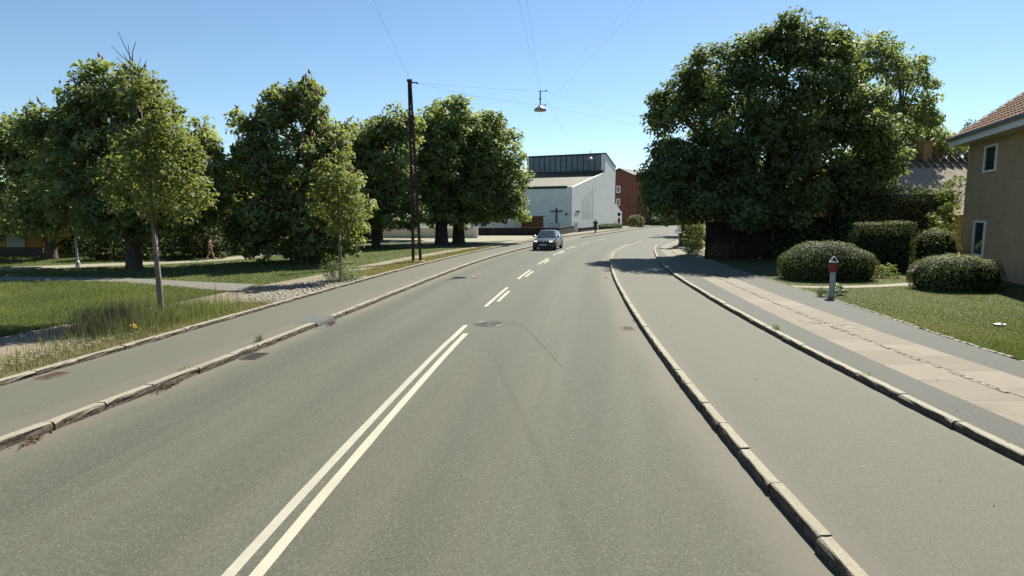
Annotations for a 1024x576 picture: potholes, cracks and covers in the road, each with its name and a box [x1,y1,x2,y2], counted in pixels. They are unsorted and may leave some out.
drain grate [34,371,70,380]
drain grate [238,352,269,360]
crack [512,321,563,367]
